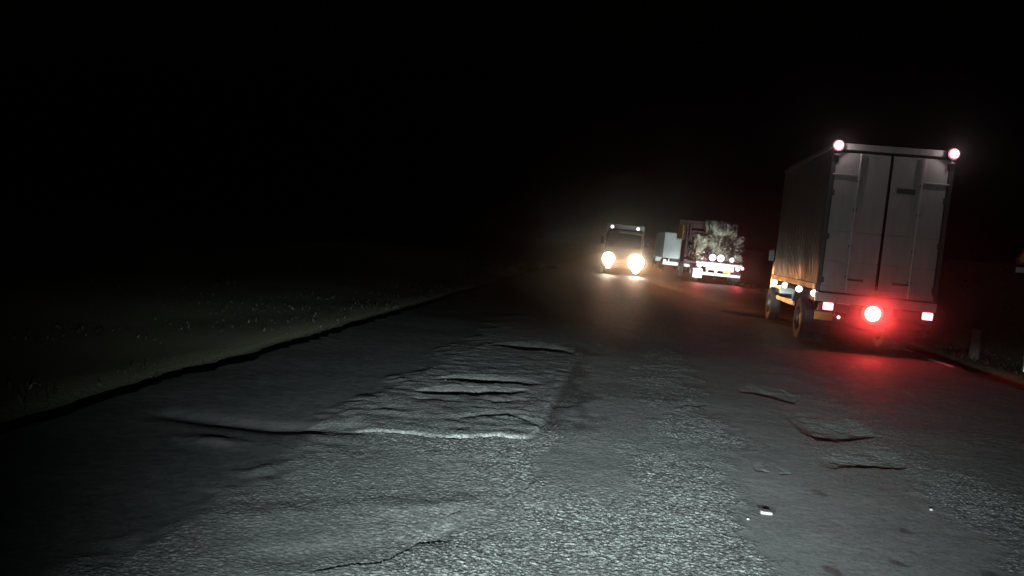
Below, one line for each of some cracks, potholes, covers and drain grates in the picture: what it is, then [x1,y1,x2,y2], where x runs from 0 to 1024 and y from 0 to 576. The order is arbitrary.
pothole [809,445,915,470]
pothole [732,383,803,405]
pothole [427,374,546,386]
pothole [775,405,876,443]
pothole [412,384,535,396]
pothole [488,341,582,357]
crack [310,504,465,572]
